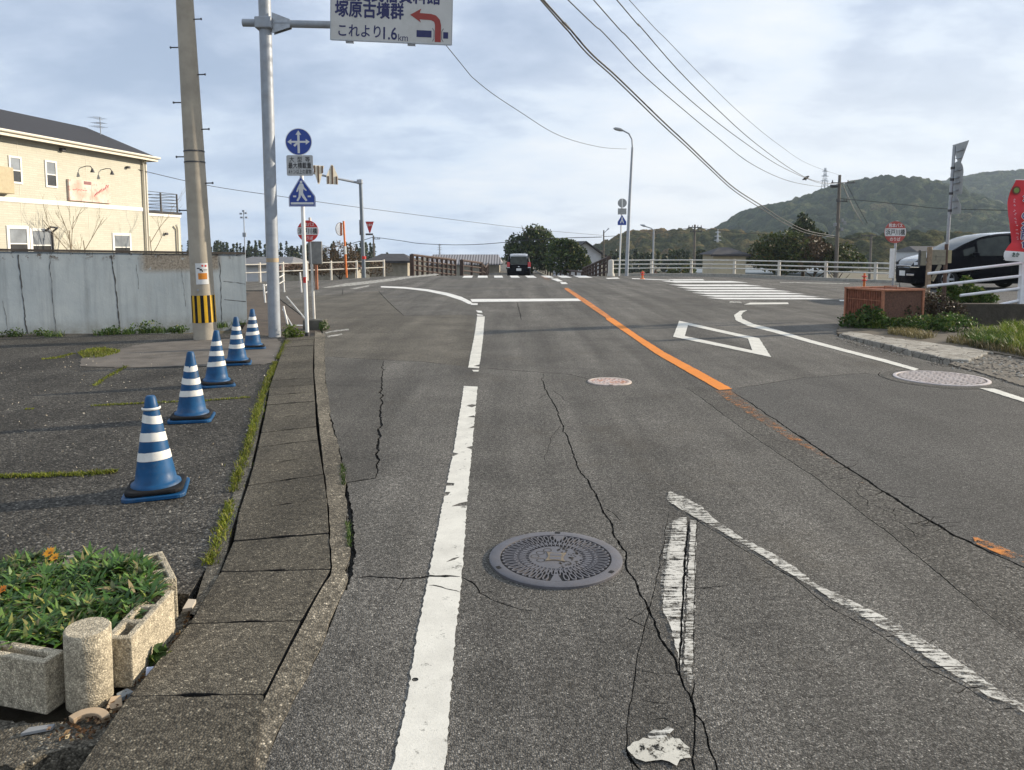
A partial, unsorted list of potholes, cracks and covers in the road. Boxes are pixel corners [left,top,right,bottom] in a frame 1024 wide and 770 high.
manhole cover [489,532,623,590]
crack [330,361,535,612]
manhole cover [588,377,632,386]
crack [537,374,729,770]
crack [690,390,1022,640]
manhole cover [882,370,1004,388]
